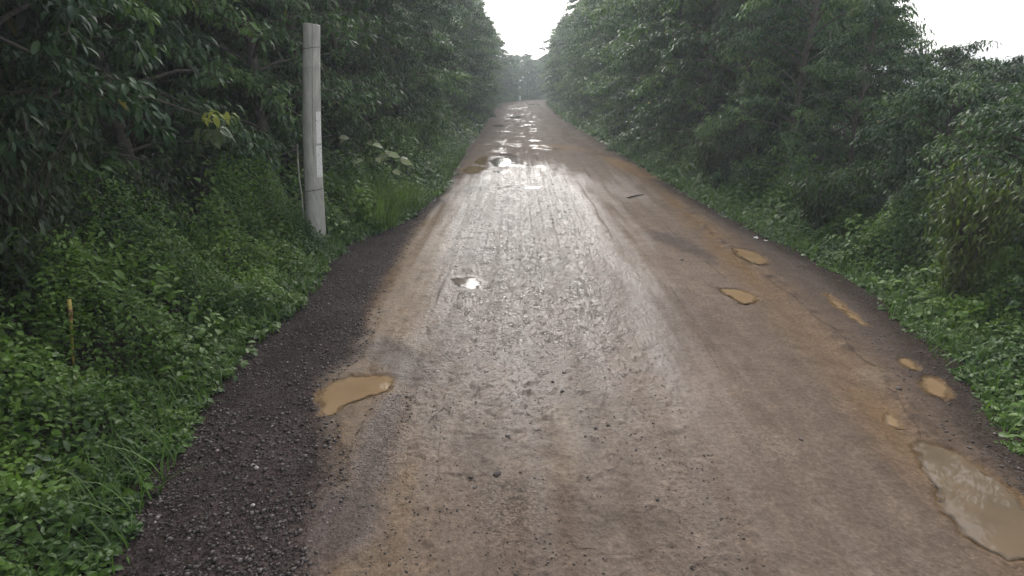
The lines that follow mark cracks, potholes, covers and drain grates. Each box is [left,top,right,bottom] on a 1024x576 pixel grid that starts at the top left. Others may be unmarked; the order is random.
pothole [727,247,773,266]
pothole [879,409,908,430]
pothole [310,372,398,420]
pothole [913,373,959,403]
pothole [818,292,876,328]
pothole [444,276,484,290]
pothole [497,153,522,167]
pothole [488,157,513,167]
pothole [891,355,925,372]
pothole [902,438,1024,568]
